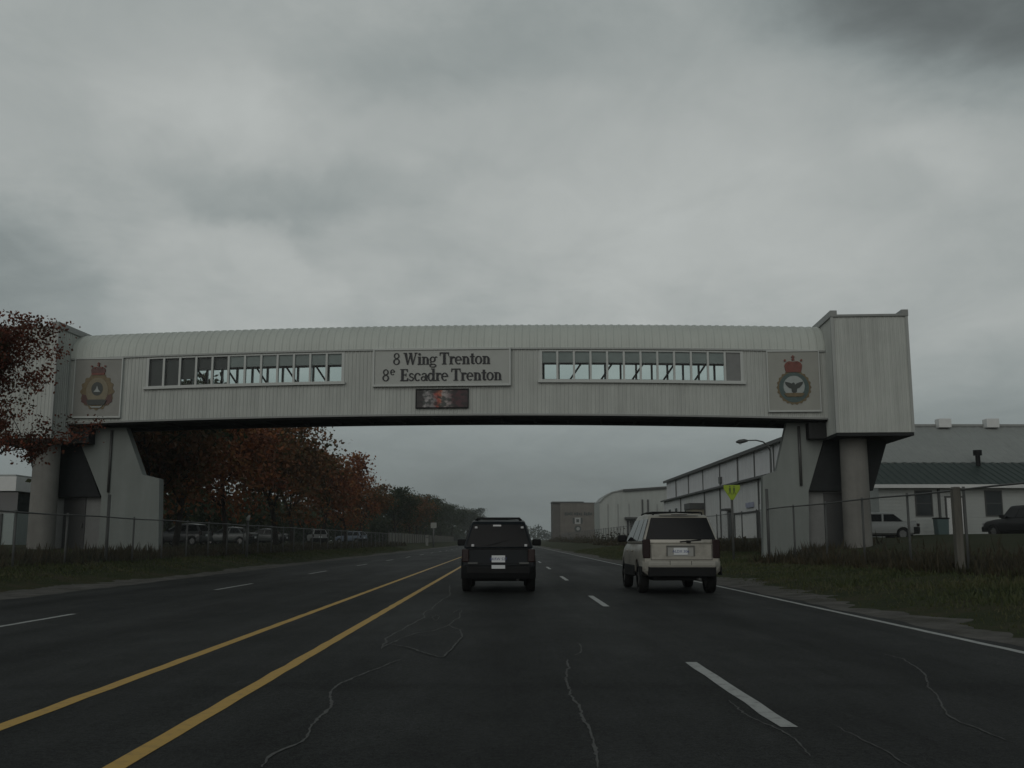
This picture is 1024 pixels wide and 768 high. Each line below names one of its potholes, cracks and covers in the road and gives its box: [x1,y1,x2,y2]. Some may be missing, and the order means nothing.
crack [837,726,914,768]
crack [564,643,599,768]
crack [261,586,463,767]
crack [729,700,810,755]
crack [886,654,1006,740]
